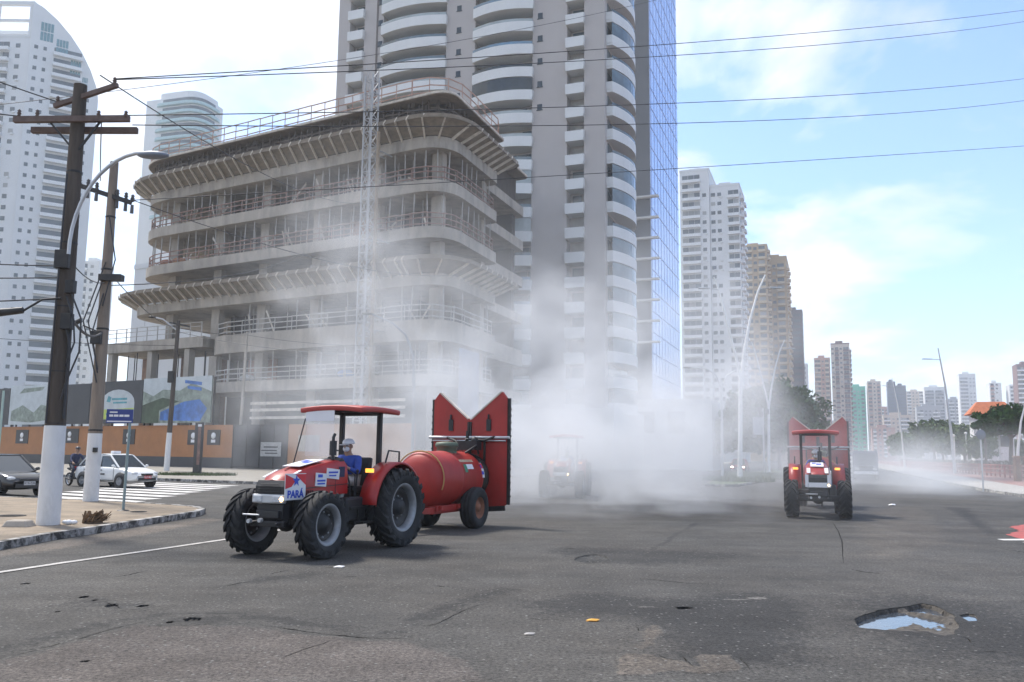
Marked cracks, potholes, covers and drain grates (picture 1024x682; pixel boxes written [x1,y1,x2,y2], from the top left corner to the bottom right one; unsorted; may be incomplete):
pothole [854,604,959,636]
